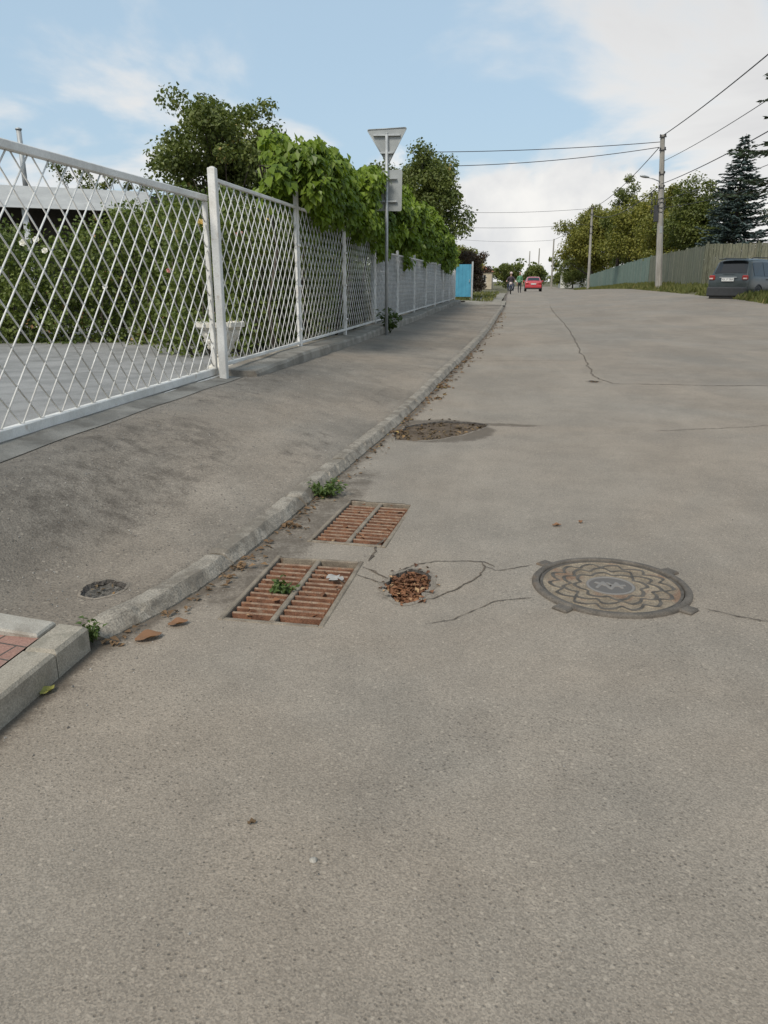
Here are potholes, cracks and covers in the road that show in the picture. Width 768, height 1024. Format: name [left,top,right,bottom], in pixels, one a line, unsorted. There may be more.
pothole [391,418,489,442]
manhole cover [532,557,699,619]
pothole [378,563,440,606]
crack [399,560,531,624]
crack [473,307,766,386]
drain grate [218,556,364,628]
pothole [77,578,130,600]
drain grate [307,500,411,548]
